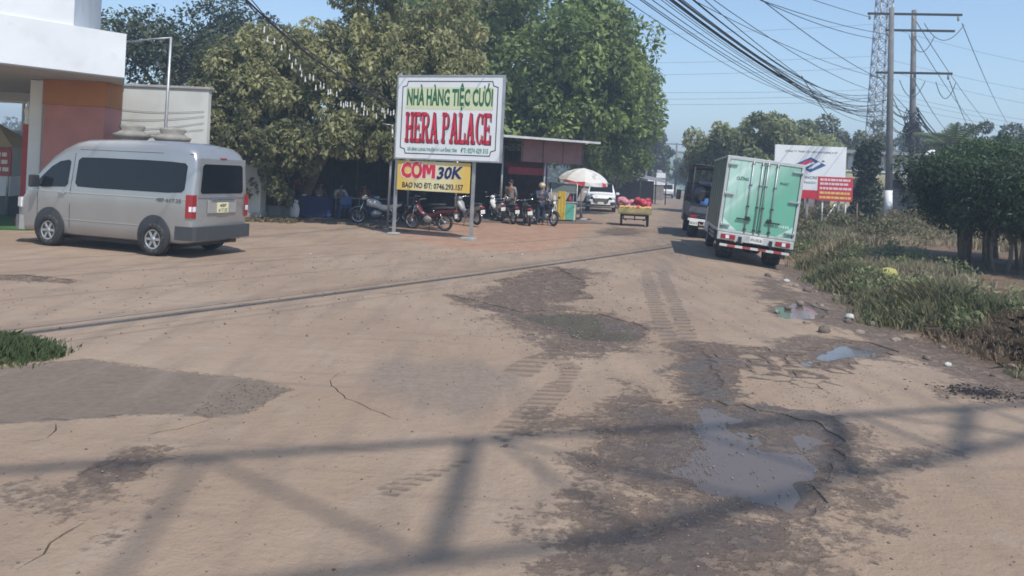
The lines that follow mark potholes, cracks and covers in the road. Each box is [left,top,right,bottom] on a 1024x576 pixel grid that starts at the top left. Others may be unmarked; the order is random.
pothole [587,400,846,521]
crack [16,522,85,570]
crack [714,347,852,394]
pothole [784,341,899,368]
crack [330,374,400,420]
pothole [766,300,828,319]
